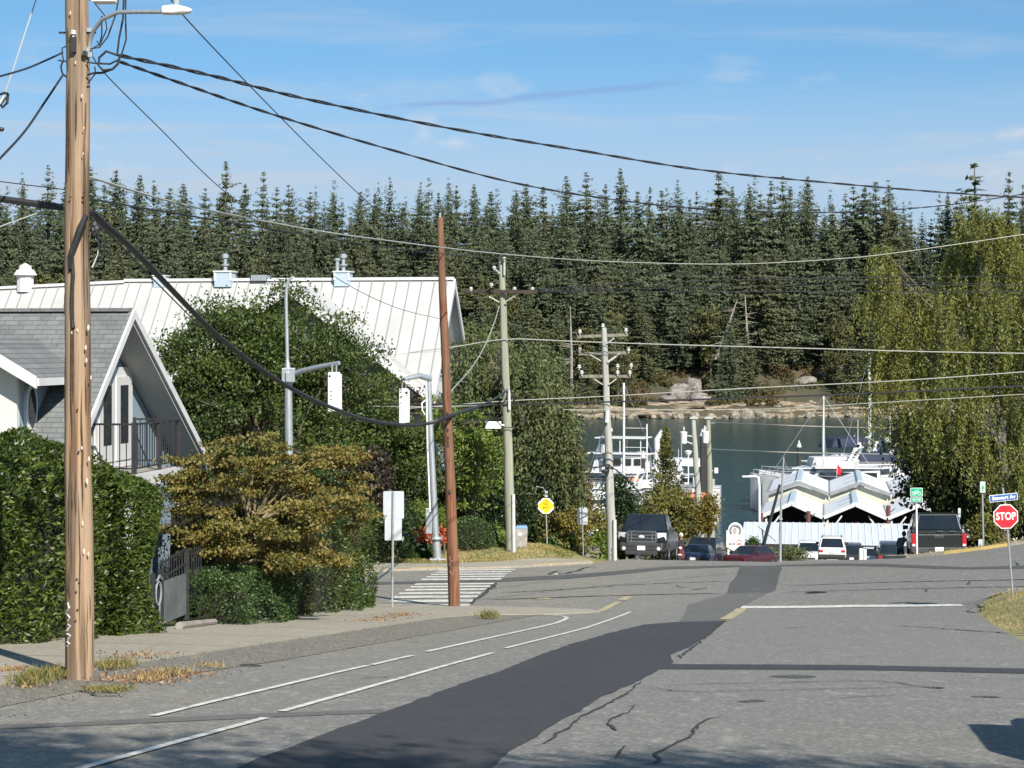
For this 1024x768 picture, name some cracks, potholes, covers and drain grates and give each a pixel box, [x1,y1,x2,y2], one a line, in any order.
crack [678,621,725,658]
crack [532,680,927,765]
